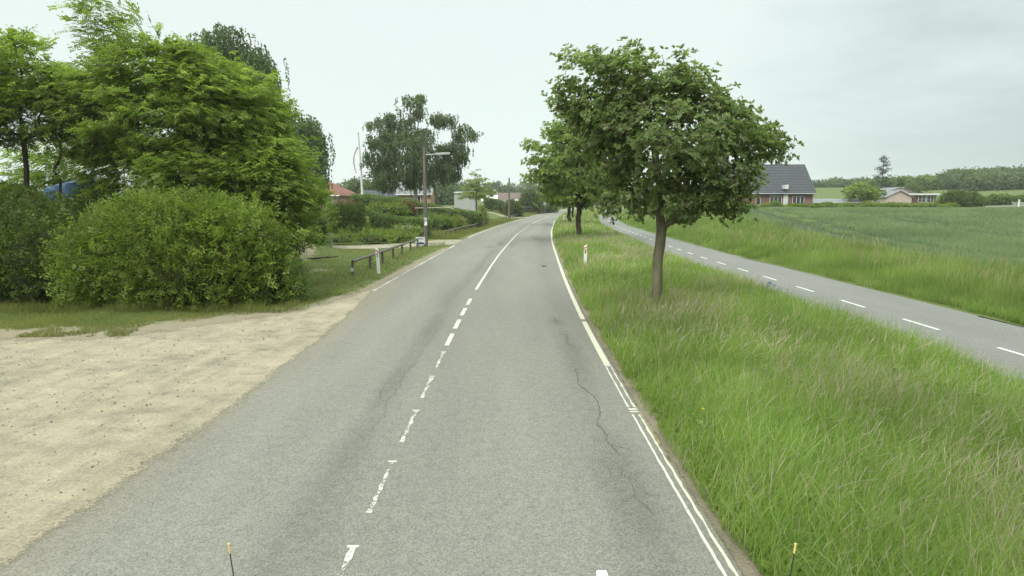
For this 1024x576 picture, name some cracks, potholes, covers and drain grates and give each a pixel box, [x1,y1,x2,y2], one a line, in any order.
crack [575,369,652,512]
